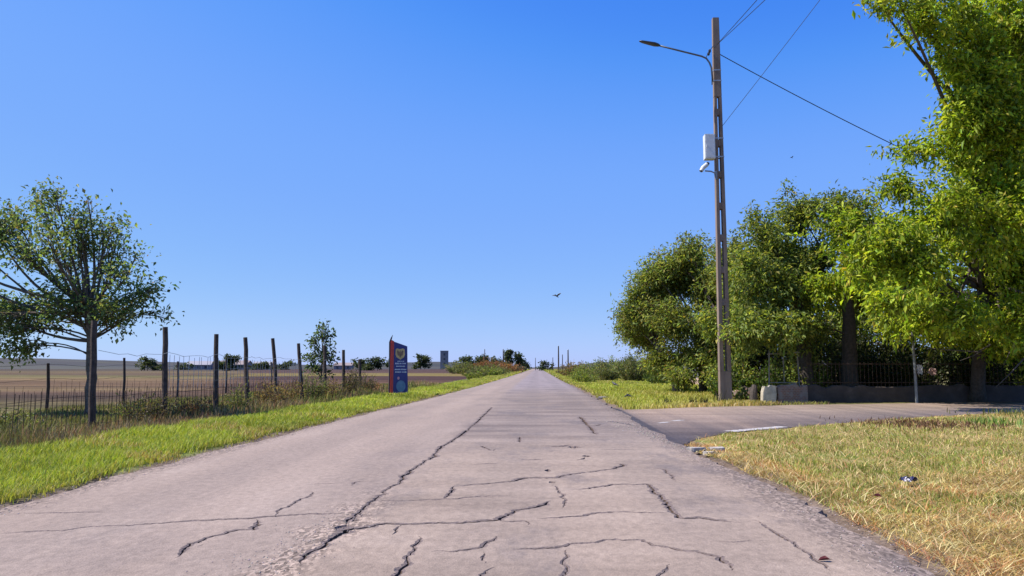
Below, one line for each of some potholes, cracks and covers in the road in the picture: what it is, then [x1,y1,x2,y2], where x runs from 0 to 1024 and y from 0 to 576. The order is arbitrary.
crack [13,407,829,576]
